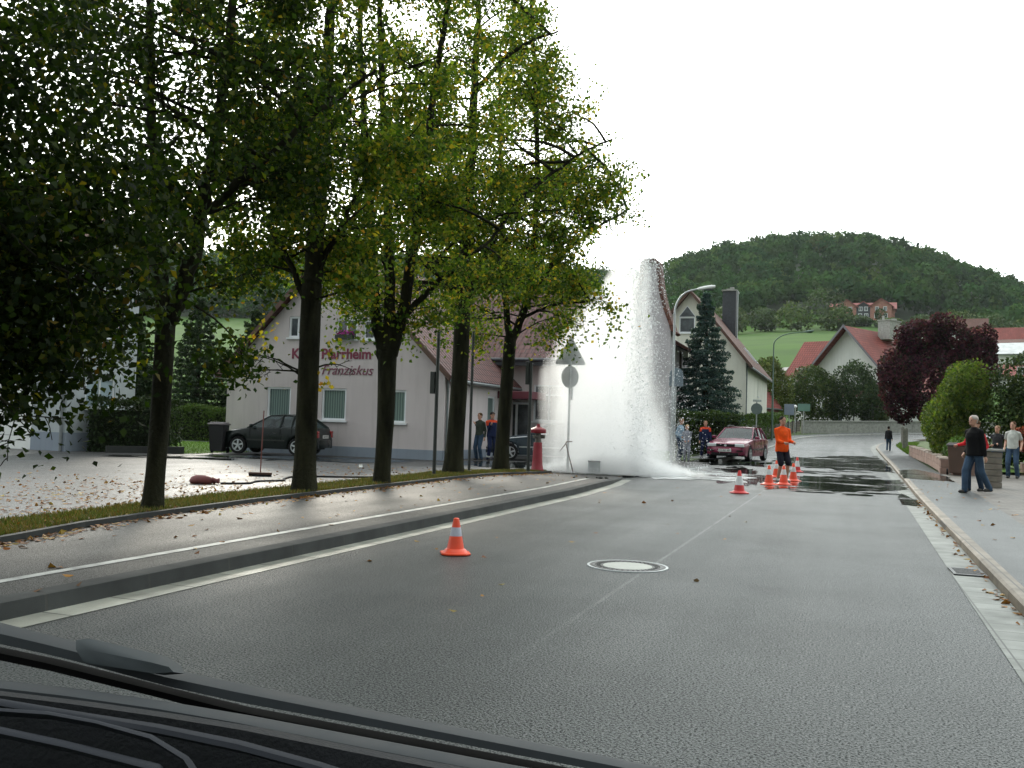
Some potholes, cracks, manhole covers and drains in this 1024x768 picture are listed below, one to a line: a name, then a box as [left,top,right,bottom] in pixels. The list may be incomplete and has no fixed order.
manhole cover [587,560,668,573]
